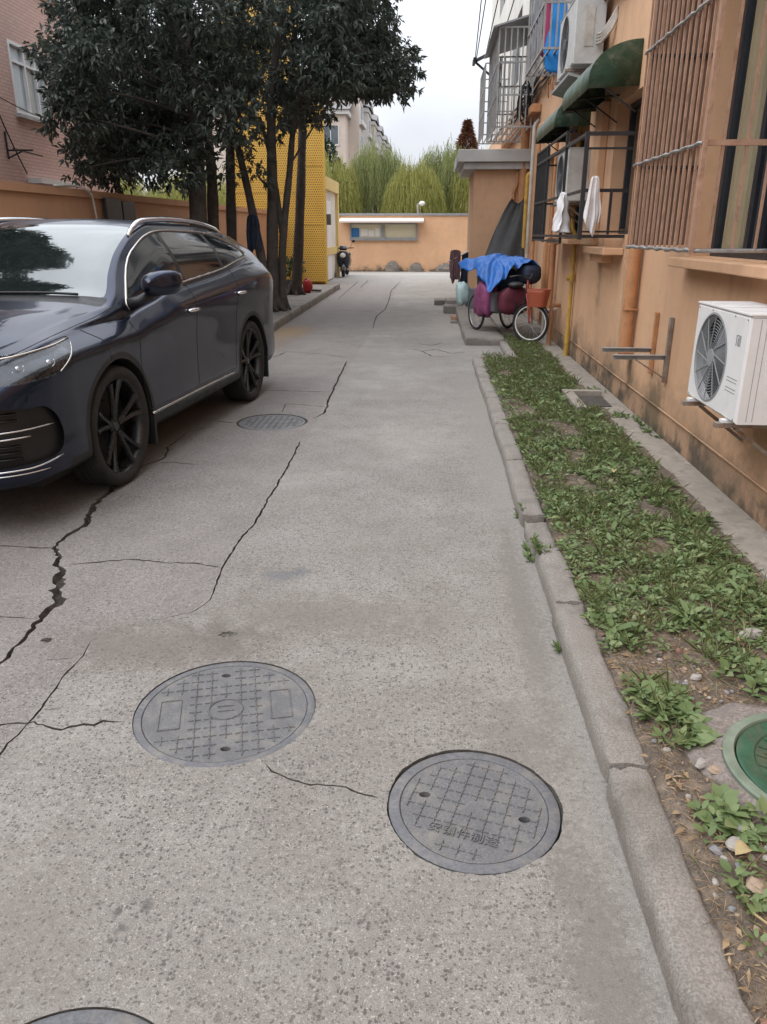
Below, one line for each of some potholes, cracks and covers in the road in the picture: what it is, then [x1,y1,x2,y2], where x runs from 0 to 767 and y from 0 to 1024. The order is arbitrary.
crack [0,720,119,731]
manhole cover [132,661,316,767]
manhole cover [684,703,767,826]
manhole cover [25,1007,154,1024]
manhole cover [236,414,308,431]
manhole cover [387,749,563,876]
crack [0,420,233,664]
crack [266,765,377,798]
